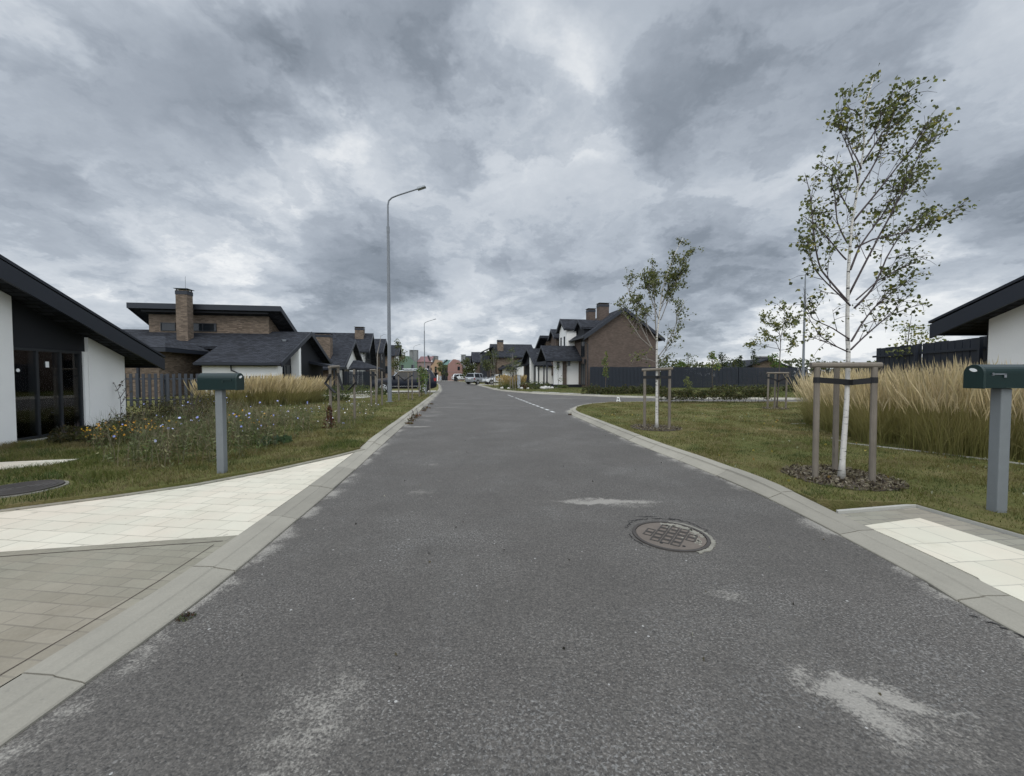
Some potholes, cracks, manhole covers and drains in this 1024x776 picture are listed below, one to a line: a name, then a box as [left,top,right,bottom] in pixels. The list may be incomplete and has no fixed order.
manhole cover [632,521,716,554]
